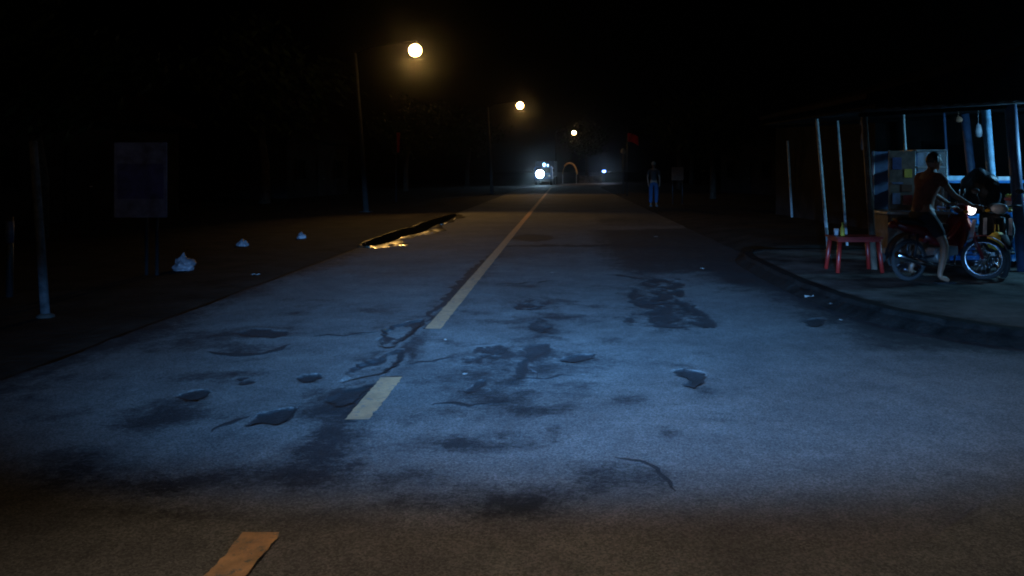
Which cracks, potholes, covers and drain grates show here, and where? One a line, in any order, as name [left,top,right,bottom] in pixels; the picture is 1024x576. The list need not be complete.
pothole [309,375,389,413]
crack [408,357,453,365]
crack [614,457,676,491]
pothole [223,326,303,341]
pothole [549,351,606,365]
pothole [229,403,311,432]
pothole [285,371,334,386]
pothole [658,365,723,393]
